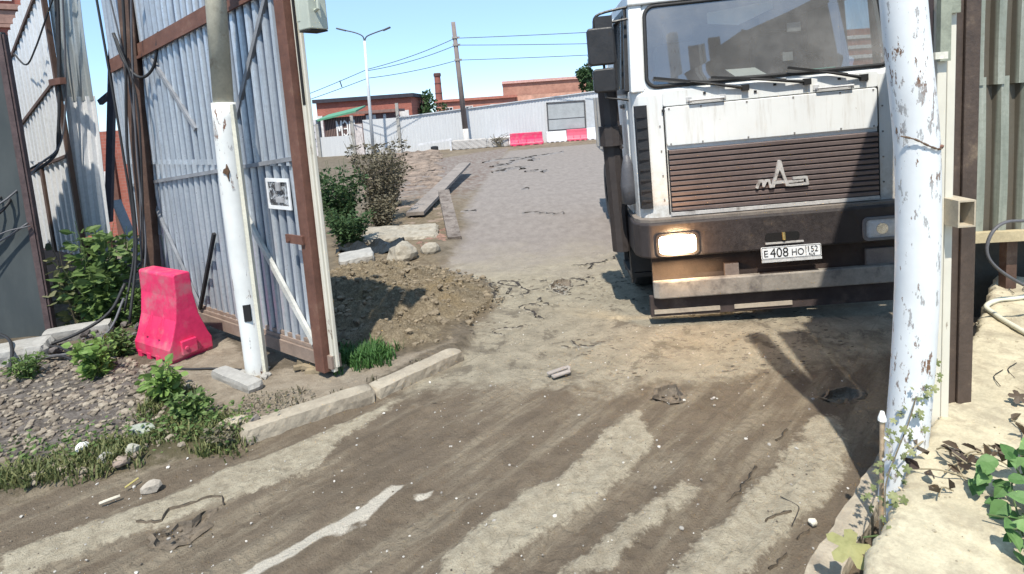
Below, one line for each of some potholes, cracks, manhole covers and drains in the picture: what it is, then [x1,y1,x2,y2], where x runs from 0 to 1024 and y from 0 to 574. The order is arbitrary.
crack [482,151,564,190]
crack [561,340,601,349]
crack [488,256,616,336]
pothole [147,507,218,551]
pothole [821,386,868,404]
